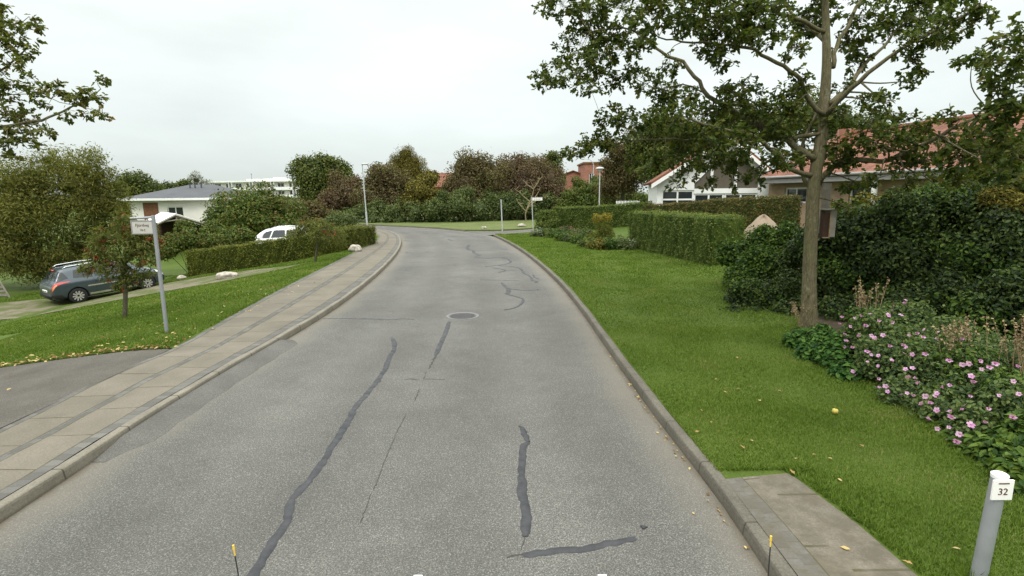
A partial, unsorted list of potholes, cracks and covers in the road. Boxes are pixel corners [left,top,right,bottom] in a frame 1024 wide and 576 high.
manhole cover [446,312,479,320]
